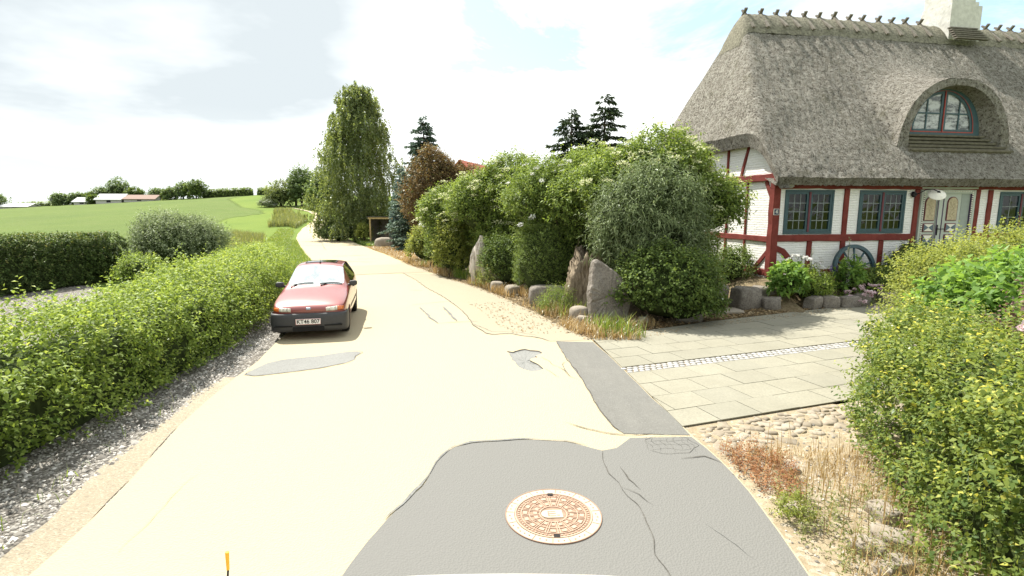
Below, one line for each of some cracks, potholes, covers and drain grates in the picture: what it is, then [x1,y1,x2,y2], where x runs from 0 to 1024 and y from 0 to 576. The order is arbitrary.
crack [602,451,671,576]
manhole cover [505,489,602,545]
crack [407,275,549,341]
pothole [507,349,543,371]
